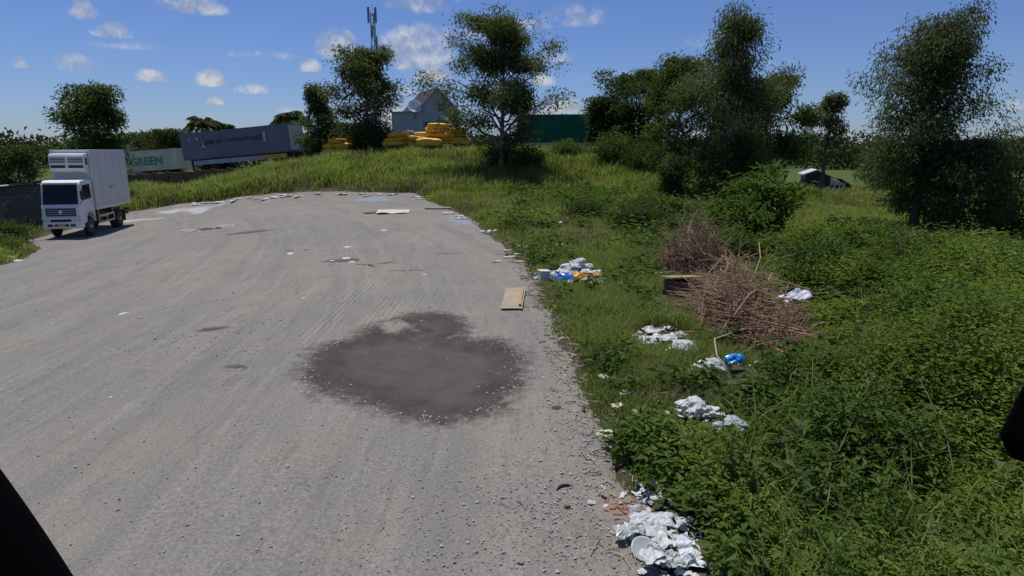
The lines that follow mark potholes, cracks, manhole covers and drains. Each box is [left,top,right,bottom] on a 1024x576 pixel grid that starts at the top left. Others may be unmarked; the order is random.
pothole [218,363,253,372]
pothole [261,308,556,439]
pothole [183,325,238,334]
